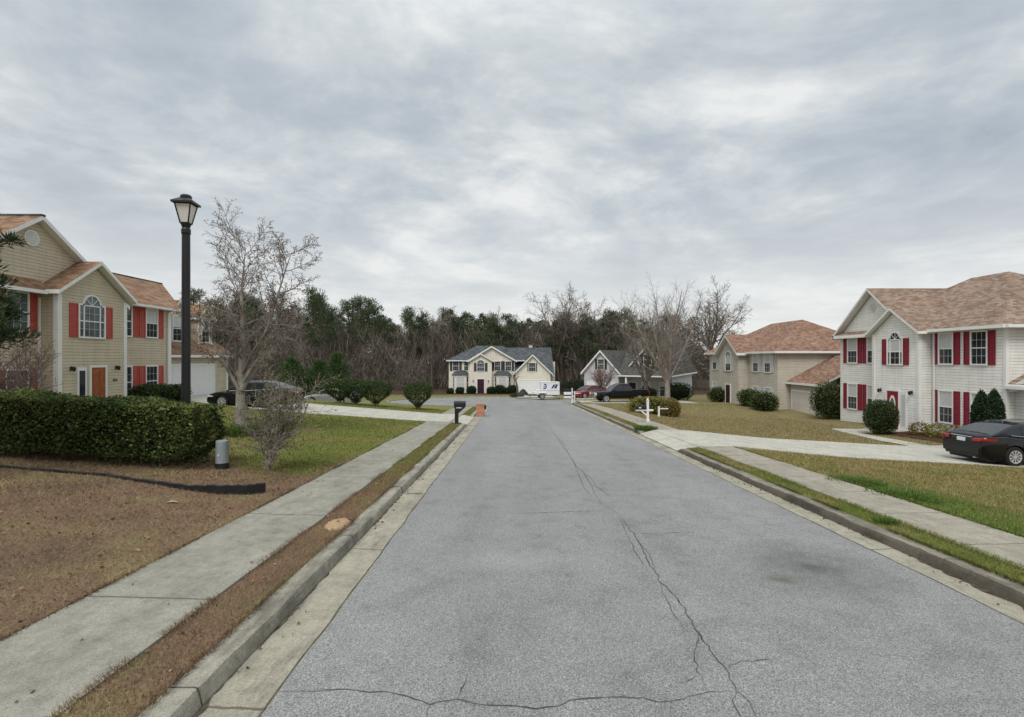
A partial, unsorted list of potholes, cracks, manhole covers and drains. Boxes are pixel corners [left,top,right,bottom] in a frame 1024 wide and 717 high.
crack [557,438,607,507]
crack [318,518,764,717]
